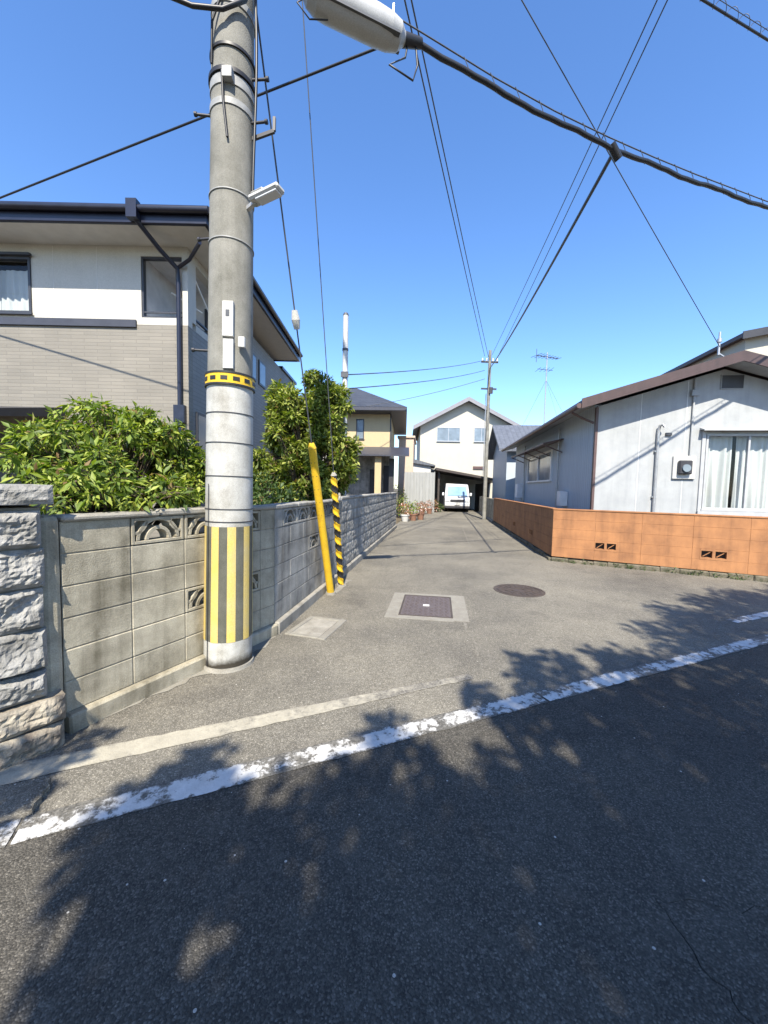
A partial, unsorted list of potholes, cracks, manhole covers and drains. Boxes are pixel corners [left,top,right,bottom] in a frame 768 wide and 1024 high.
manhole cover [384,592,469,622]
manhole cover [493,584,546,597]
crack [655,898,766,1024]
